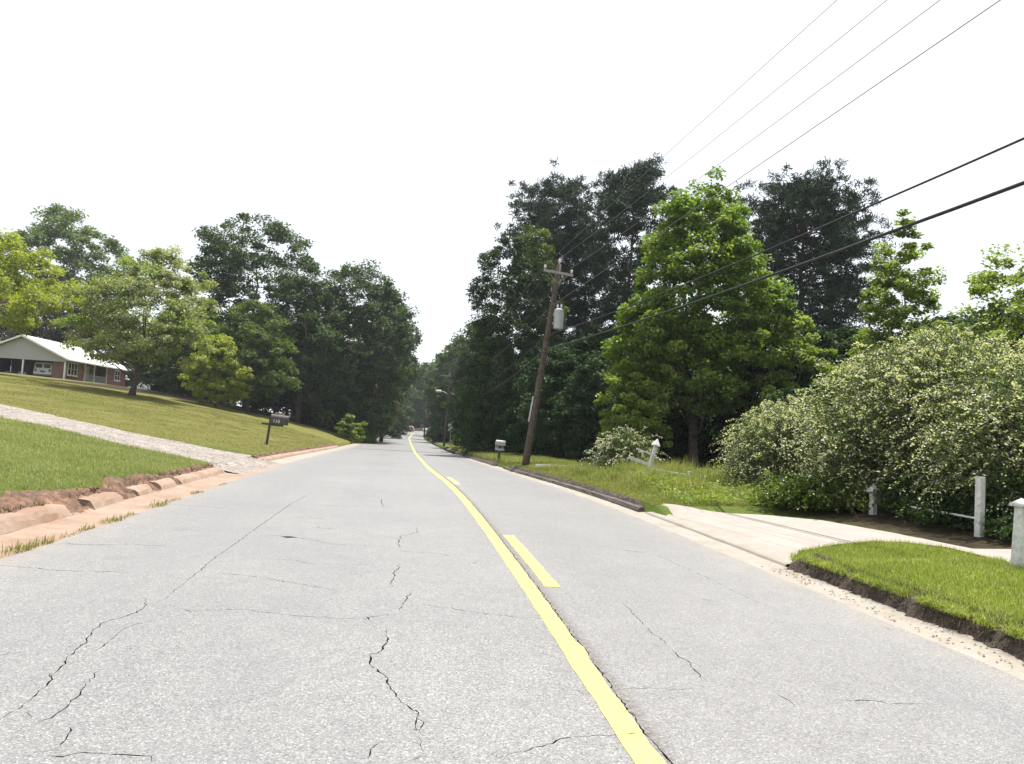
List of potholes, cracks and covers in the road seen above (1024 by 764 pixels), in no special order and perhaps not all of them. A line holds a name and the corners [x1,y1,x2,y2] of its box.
crack [625,605,734,700]
crack [1,495,474,761]
crack [496,733,650,756]
